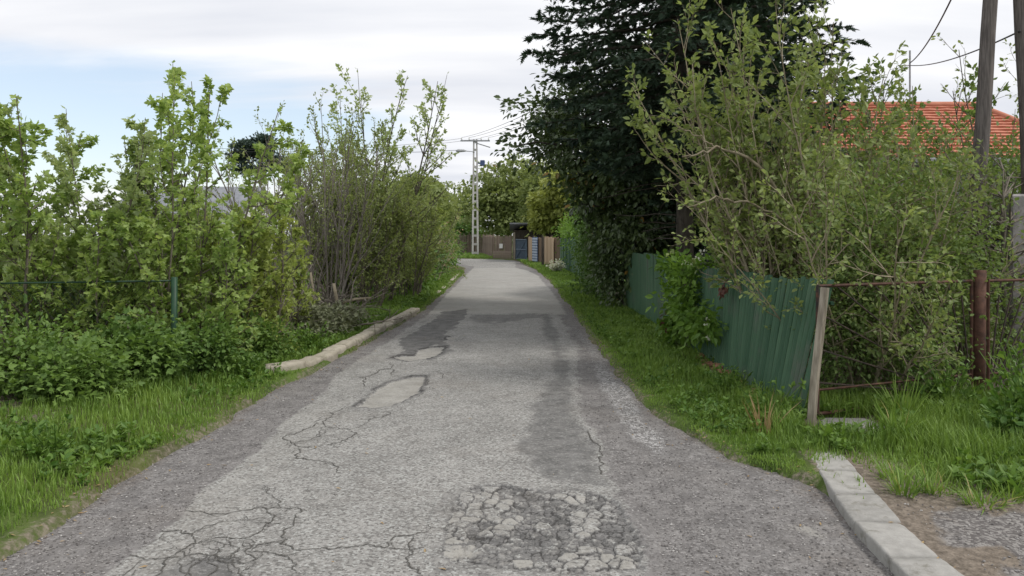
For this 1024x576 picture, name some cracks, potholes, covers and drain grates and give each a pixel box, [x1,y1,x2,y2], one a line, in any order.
crack [357,364,444,400]
crack [282,408,391,473]
pothole [418,479,664,576]
crack [119,485,423,576]
crack [588,431,605,475]
